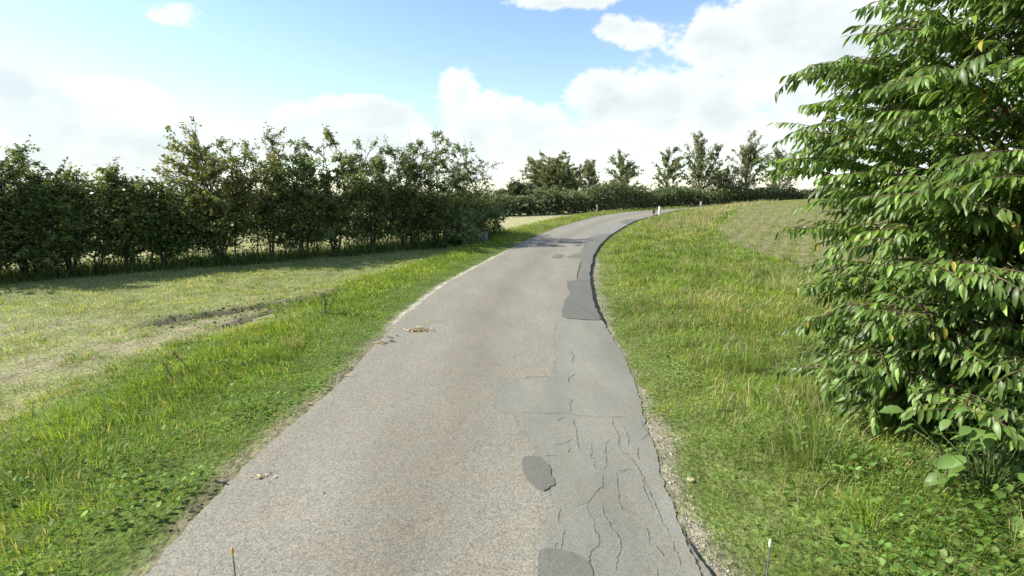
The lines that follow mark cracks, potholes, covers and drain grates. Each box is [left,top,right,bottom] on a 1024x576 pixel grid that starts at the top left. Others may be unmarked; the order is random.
crack [515,350,704,576]
